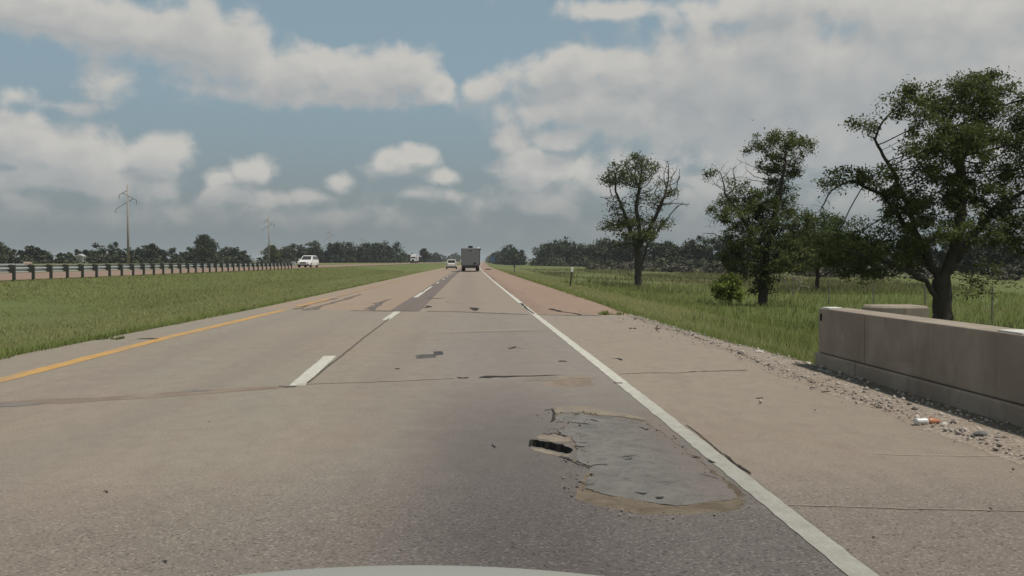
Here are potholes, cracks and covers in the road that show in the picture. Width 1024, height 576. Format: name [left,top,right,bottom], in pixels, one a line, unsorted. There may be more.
pothole [528,439,573,454]
